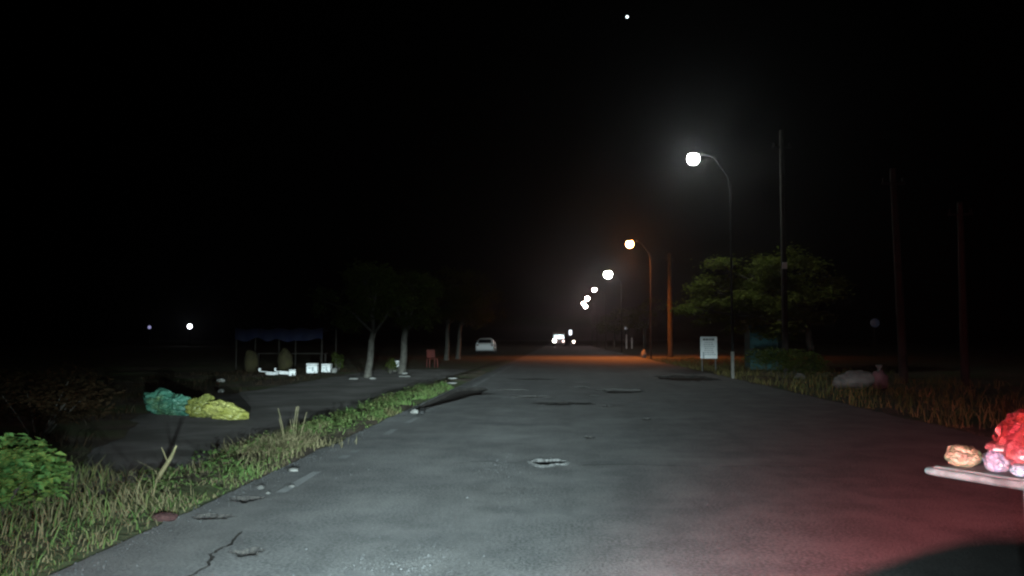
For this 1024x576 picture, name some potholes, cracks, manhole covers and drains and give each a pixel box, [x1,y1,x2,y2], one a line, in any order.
crack [188,531,242,576]
pothole [227,495,267,504]
pothole [228,546,266,557]
pothole [527,459,570,467]
